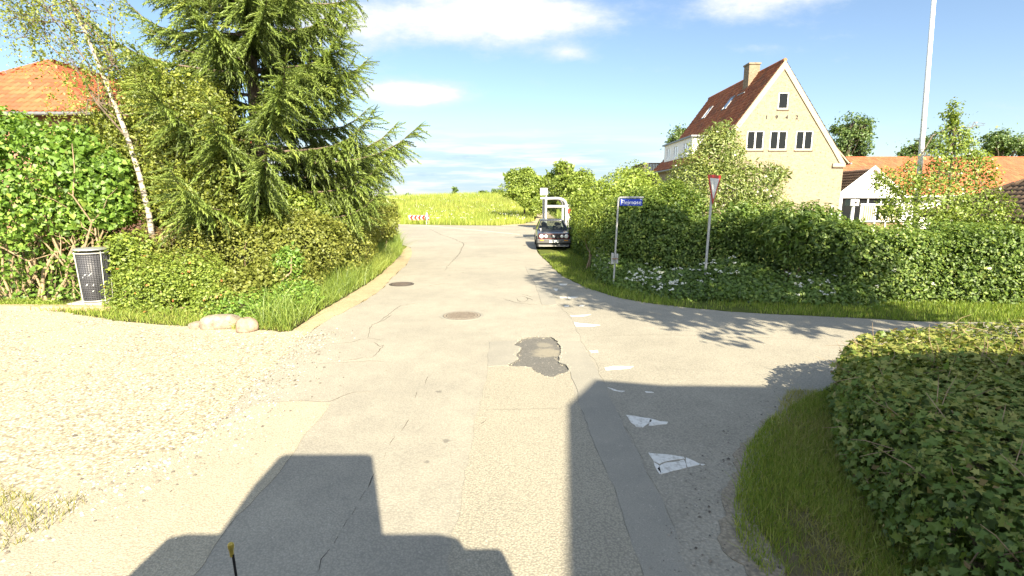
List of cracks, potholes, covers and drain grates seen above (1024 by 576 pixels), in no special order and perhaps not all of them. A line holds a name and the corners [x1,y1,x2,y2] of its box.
crack [321,303,414,364]
manhole cover [440,311,484,321]
